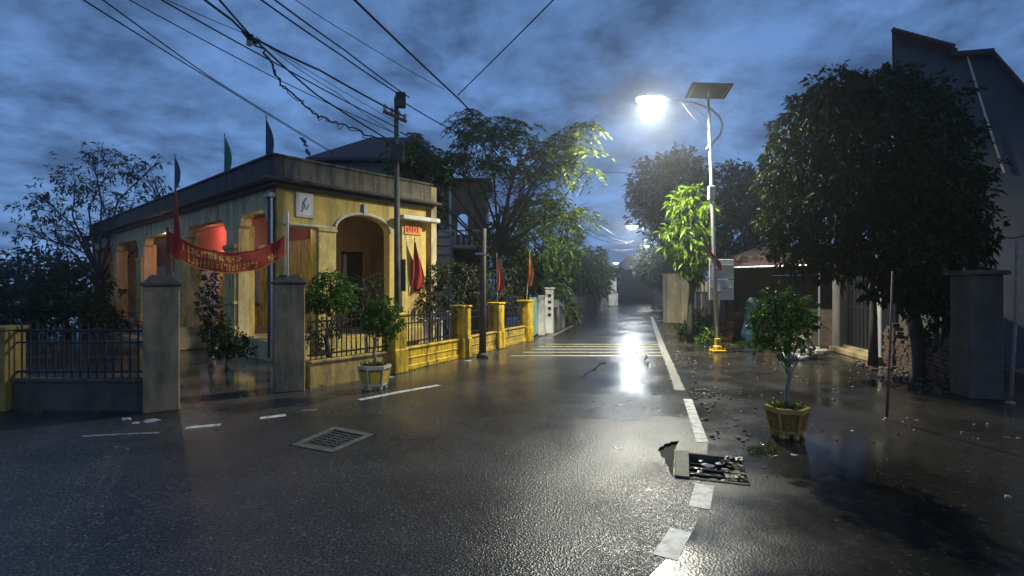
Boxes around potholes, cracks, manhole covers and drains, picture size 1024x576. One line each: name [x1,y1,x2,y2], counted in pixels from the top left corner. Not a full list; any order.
drain grate [674,450,750,486]
crack [578,361,606,379]
pothole [658,441,679,476]
